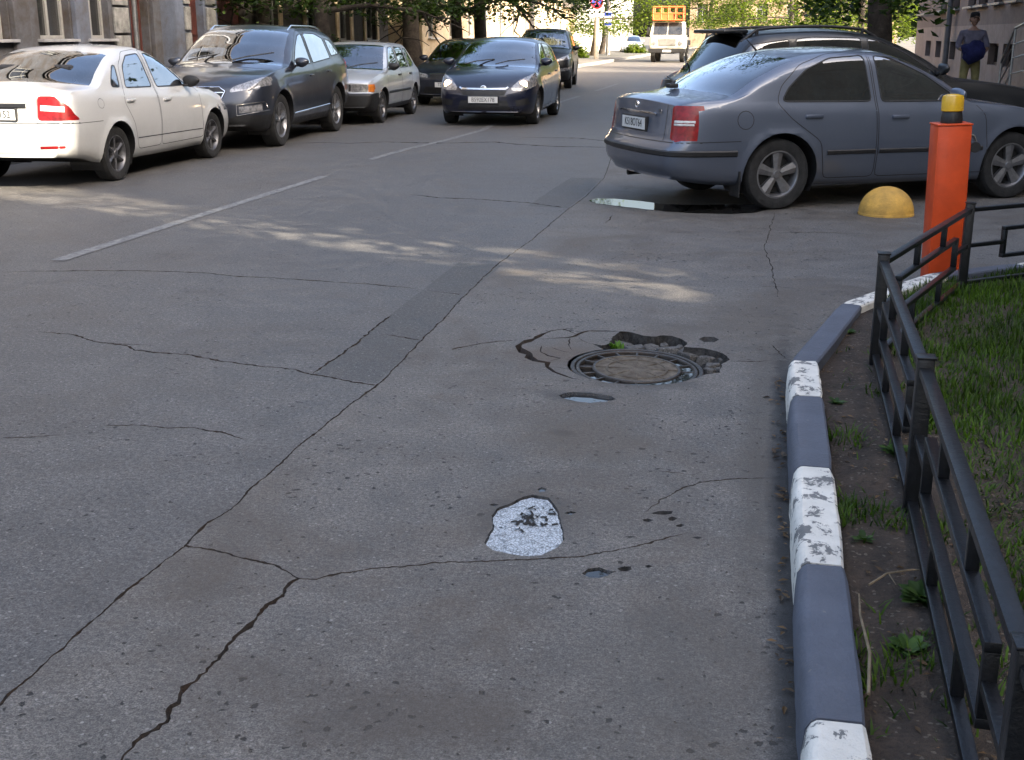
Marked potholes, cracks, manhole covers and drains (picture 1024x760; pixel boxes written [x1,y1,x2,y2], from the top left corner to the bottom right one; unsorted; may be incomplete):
pothole [582,567,616,578]
crack [37,316,422,385]
pothole [559,392,616,403]
crack [6,425,246,440]
crack [764,213,859,294]
crack [120,532,688,760]
crack [644,470,779,513]
manhole cover [570,349,704,385]
